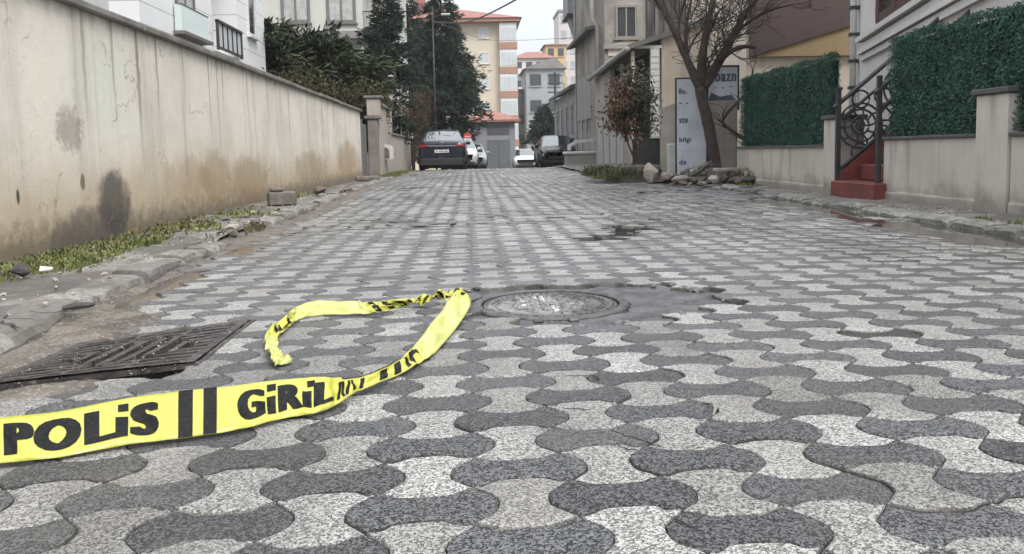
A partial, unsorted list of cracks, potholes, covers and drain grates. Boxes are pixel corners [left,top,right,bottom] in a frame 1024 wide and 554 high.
drain grate [0,319,255,392]
pothole [609,227,646,236]
manhole cover [471,289,630,323]
